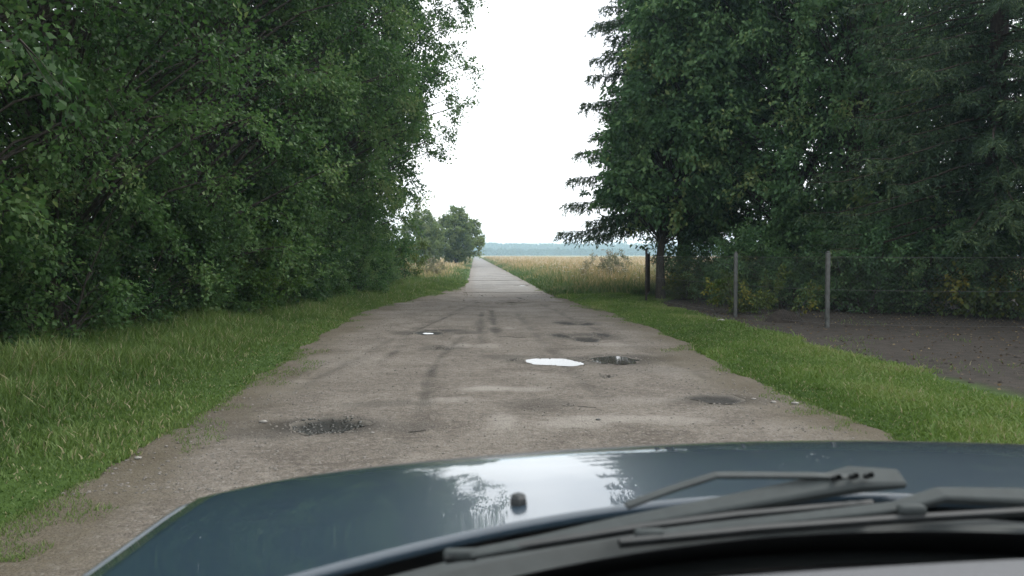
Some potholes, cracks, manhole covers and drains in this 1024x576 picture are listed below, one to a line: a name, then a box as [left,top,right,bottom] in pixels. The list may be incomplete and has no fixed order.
pothole [684,394,745,405]
pothole [589,356,642,365]
pothole [524,357,590,367]
pothole [289,416,374,435]
